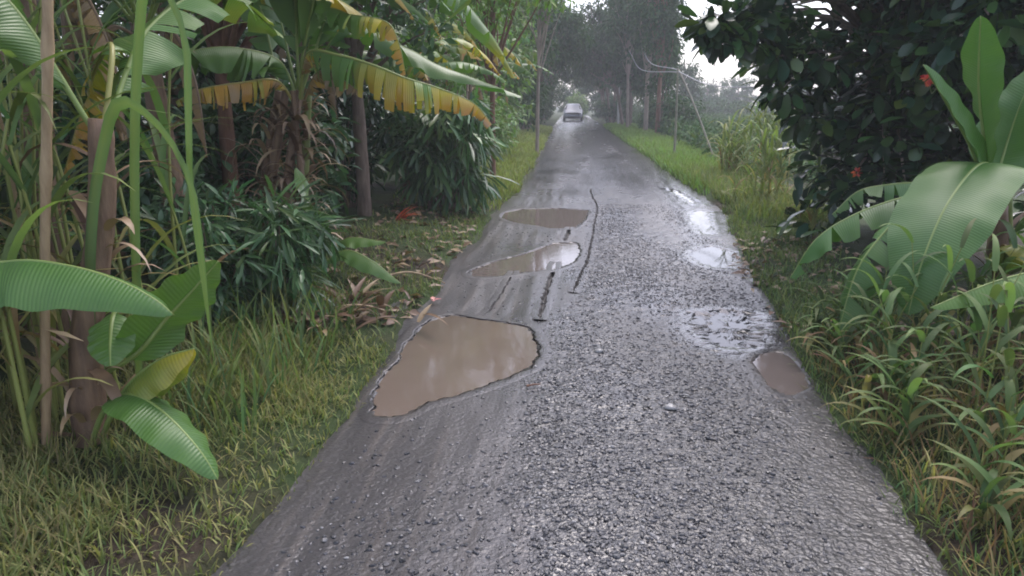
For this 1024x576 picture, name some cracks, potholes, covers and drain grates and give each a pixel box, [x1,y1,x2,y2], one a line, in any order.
pothole [495,207,594,230]
pothole [681,209,724,237]
pothole [461,241,586,279]
pothole [357,312,551,425]
pothole [739,346,821,402]
crack [476,189,602,320]
pothole [680,244,744,271]
pothole [674,306,781,355]
